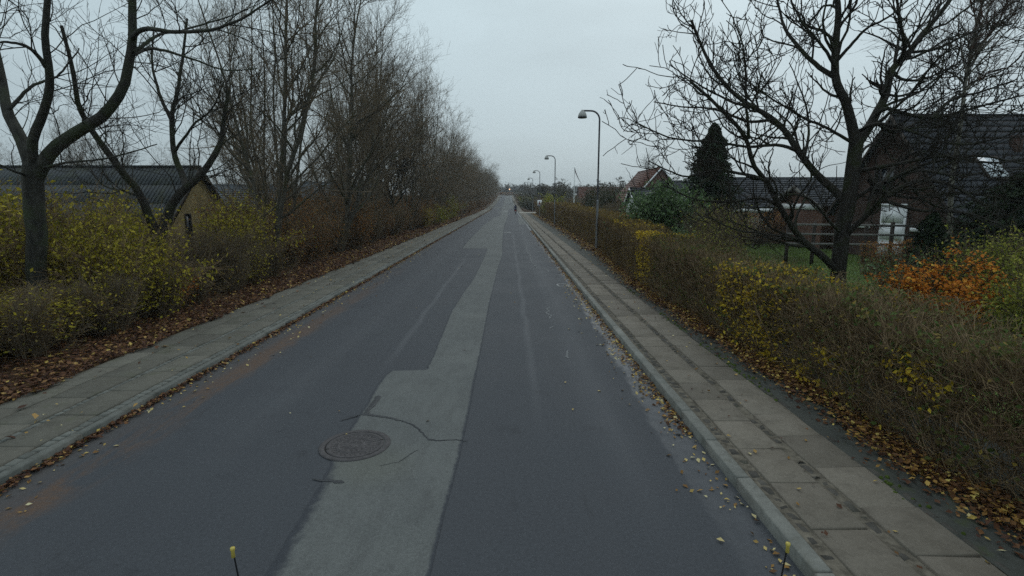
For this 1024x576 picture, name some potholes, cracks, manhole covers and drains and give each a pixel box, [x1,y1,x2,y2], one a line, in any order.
manhole cover [318,430,391,462]
